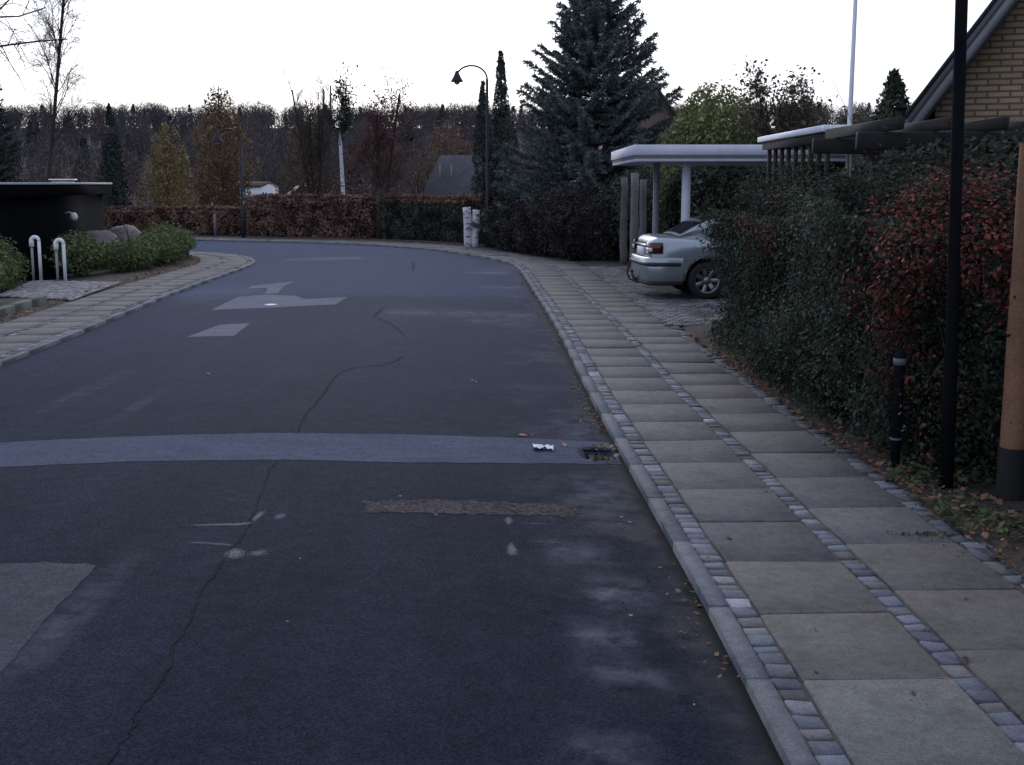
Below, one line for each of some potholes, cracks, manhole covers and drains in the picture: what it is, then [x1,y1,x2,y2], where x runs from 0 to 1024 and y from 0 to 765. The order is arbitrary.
crack [373,308,405,337]
crack [104,462,276,765]
crack [297,356,402,432]
